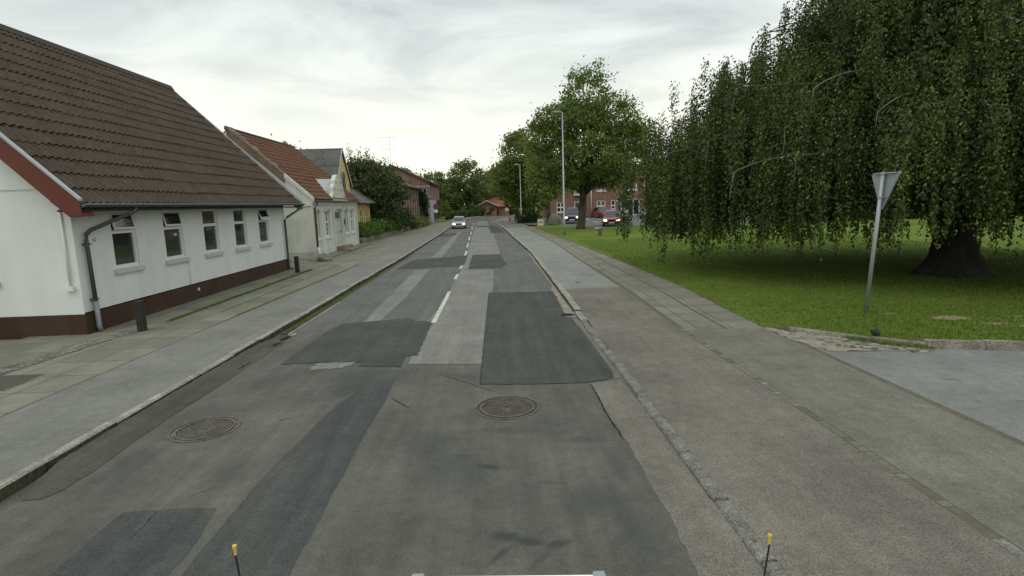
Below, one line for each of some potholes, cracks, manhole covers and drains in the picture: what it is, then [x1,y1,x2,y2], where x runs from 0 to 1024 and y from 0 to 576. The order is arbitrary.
crack [591,384,623,438]
manhole cover [167,416,241,443]
manhole cover [475,396,540,420]
